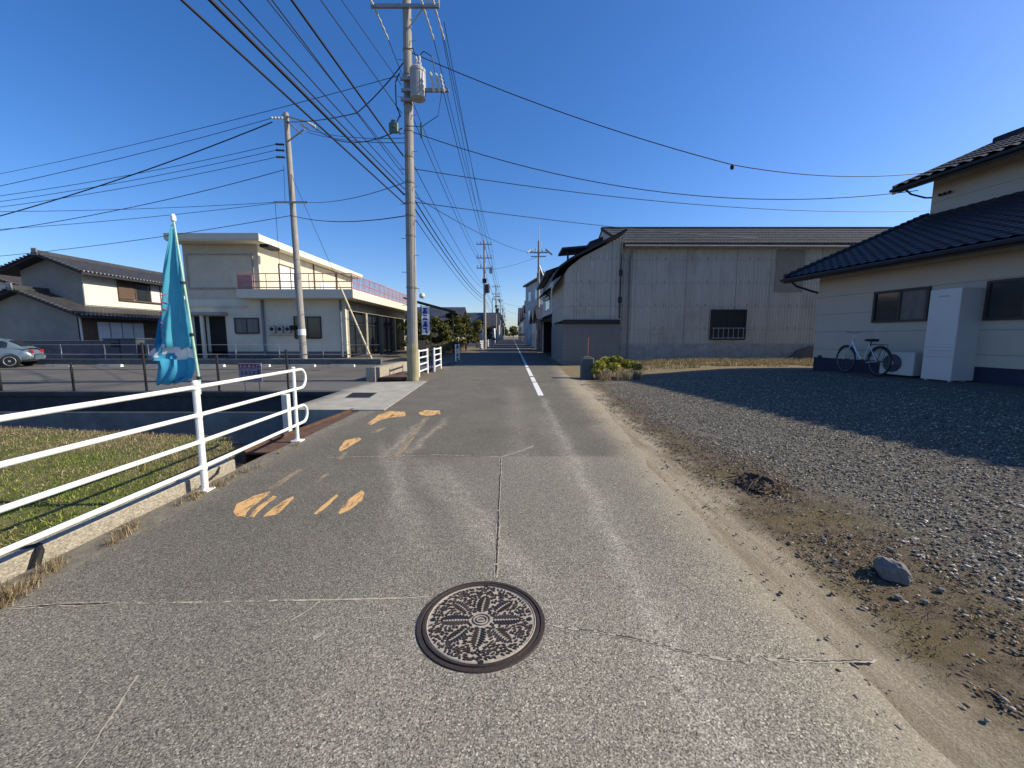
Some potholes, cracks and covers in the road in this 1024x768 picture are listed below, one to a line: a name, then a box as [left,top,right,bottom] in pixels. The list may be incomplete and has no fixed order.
crack [12,596,428,620]
manhole cover [416,581,545,674]
crack [76,675,139,768]
